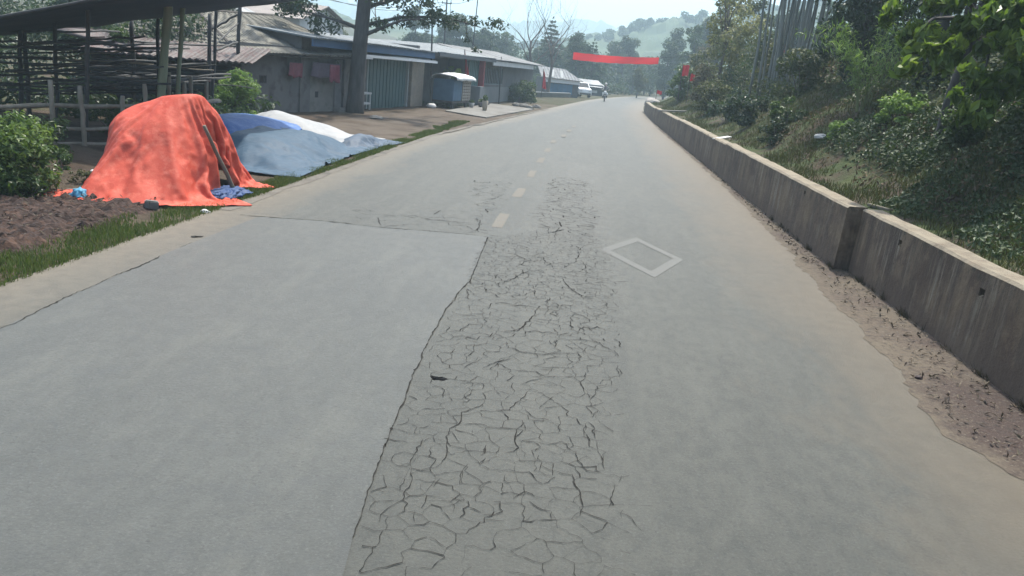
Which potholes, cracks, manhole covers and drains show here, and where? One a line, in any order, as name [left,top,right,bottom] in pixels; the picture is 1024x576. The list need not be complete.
crack [249,180,650,576]
